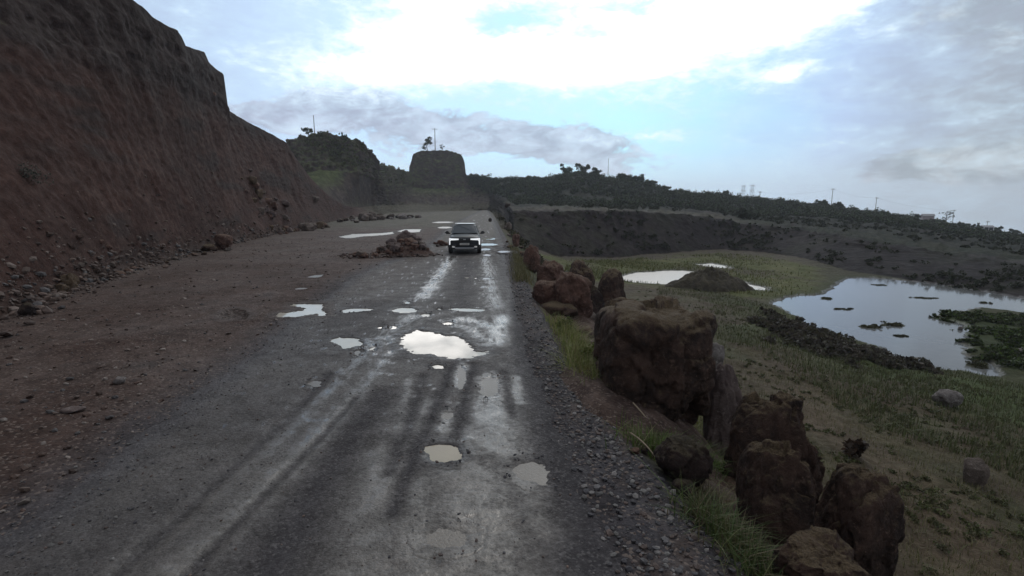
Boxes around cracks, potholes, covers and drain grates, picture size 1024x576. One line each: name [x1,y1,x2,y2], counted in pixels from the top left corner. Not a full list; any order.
pothole [404,518,487,561]
pothole [333,307,380,315]
pothole [336,231,397,239]
pothole [408,437,478,470]
